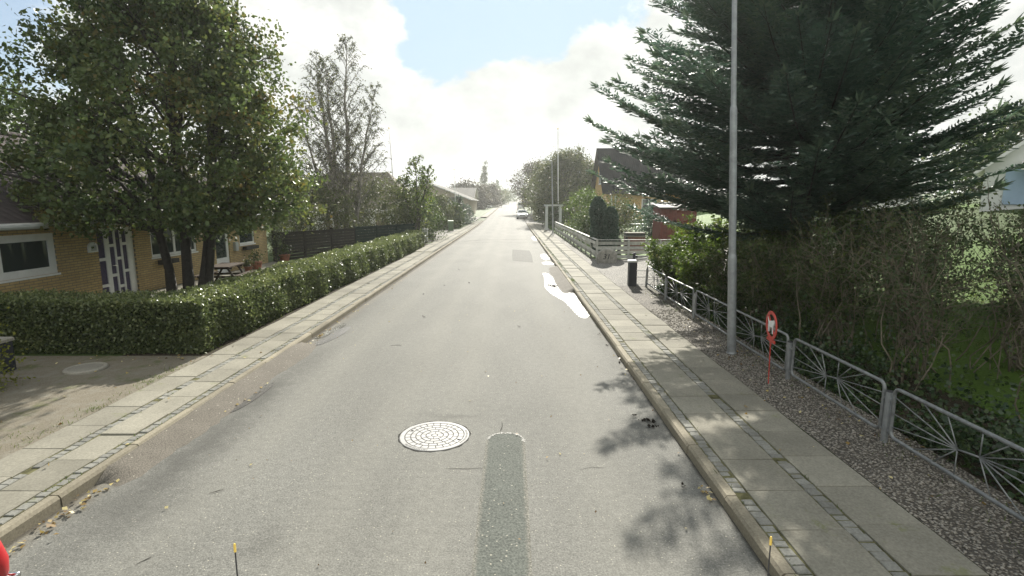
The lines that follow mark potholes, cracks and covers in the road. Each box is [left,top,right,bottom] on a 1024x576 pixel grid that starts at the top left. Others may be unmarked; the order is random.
manhole cover [62,362,109,375]
manhole cover [398,421,471,452]
